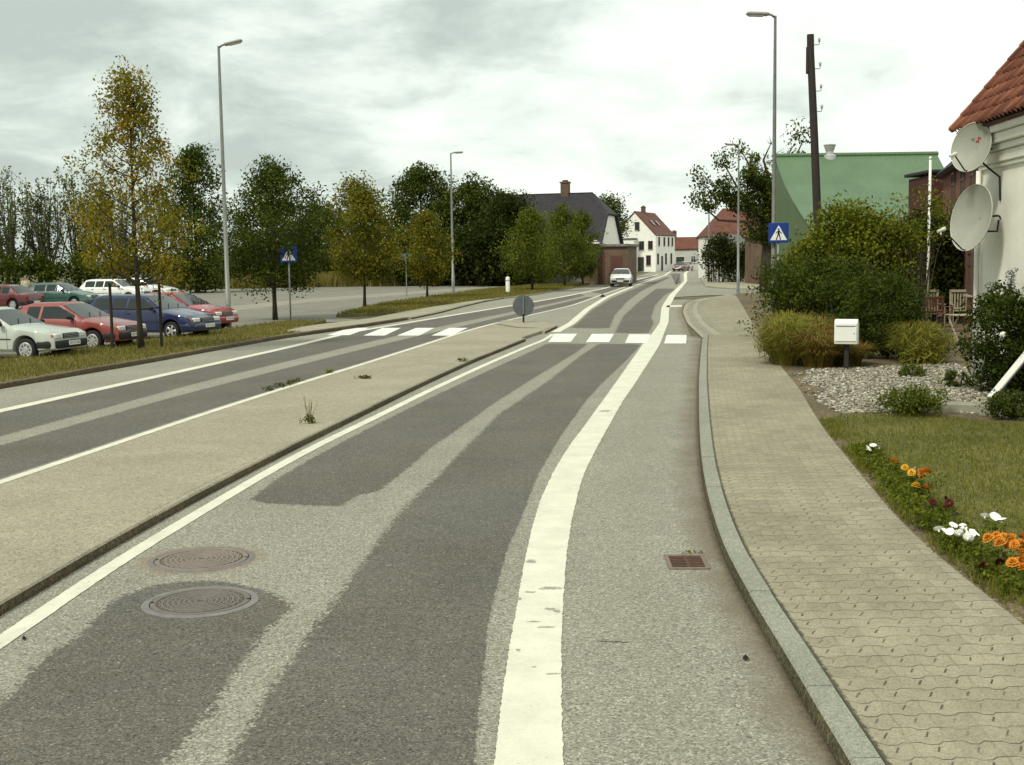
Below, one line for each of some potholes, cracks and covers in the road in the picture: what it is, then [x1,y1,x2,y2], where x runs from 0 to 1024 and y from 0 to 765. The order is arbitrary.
manhole cover [147,547,255,573]
drain grate [664,554,711,570]
manhole cover [141,586,259,619]
